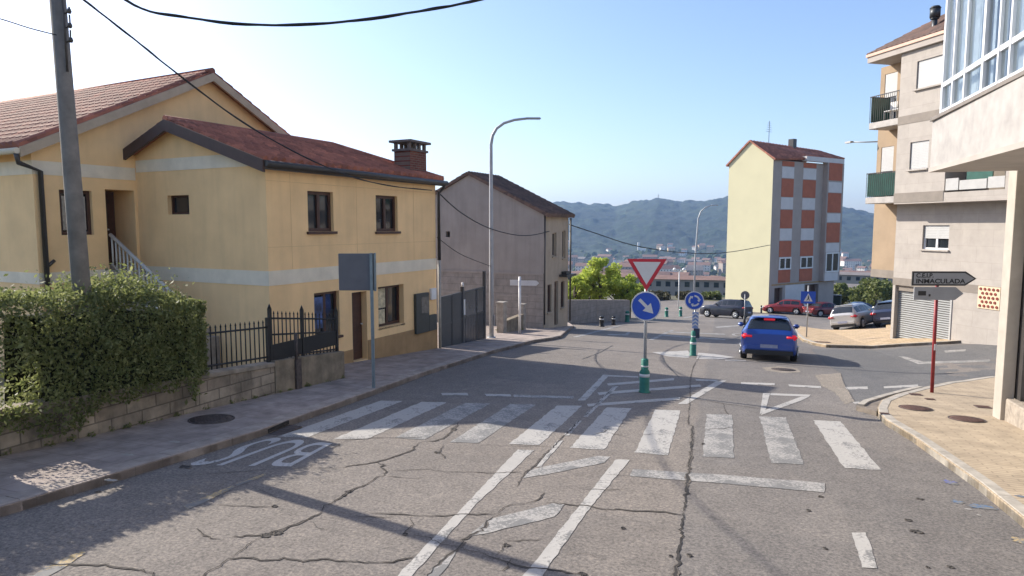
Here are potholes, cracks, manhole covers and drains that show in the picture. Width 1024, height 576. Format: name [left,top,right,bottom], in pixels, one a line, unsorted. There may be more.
crack [197,386,682,576]
manhole cover [187,414,235,424]
manhole cover [948,415,987,423]
